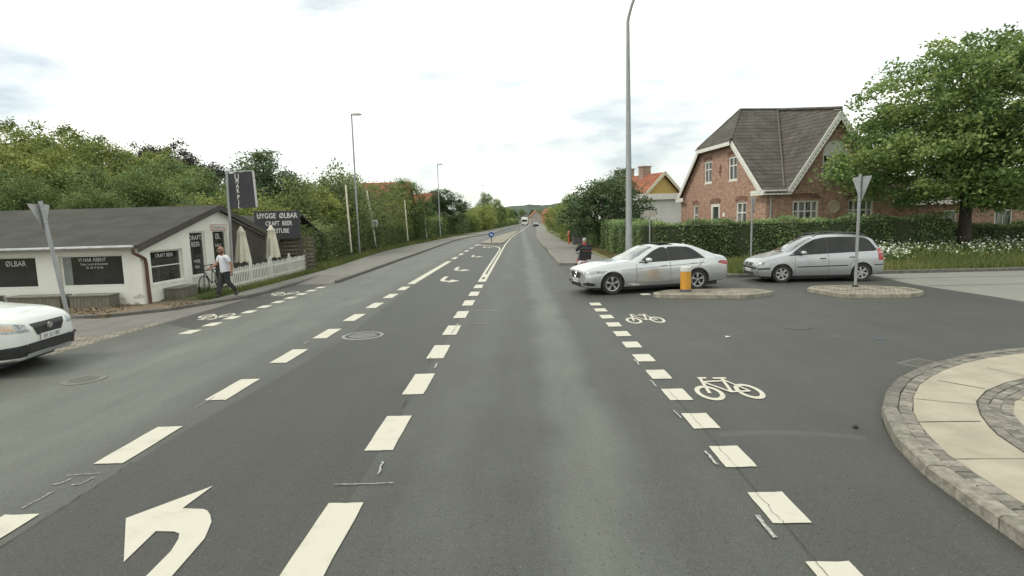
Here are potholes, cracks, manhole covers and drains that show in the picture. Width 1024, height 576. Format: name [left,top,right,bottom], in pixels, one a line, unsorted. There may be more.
manhole cover [59,374,108,386]
manhole cover [342,332,384,340]
